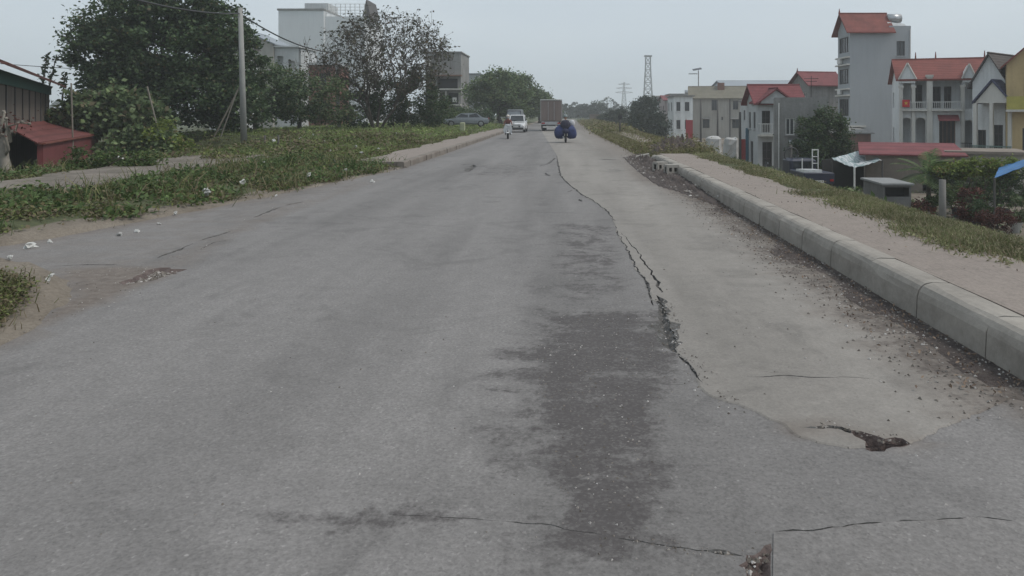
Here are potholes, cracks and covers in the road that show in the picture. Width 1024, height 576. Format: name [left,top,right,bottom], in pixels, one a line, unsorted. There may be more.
crack [540,158,703,385]
crack [158,231,230,258]
crack [775,517,1011,532]
pothole [739,544,772,576]
pothole [119,267,186,285]
crack [393,514,742,556]
pothole [851,430,910,452]
